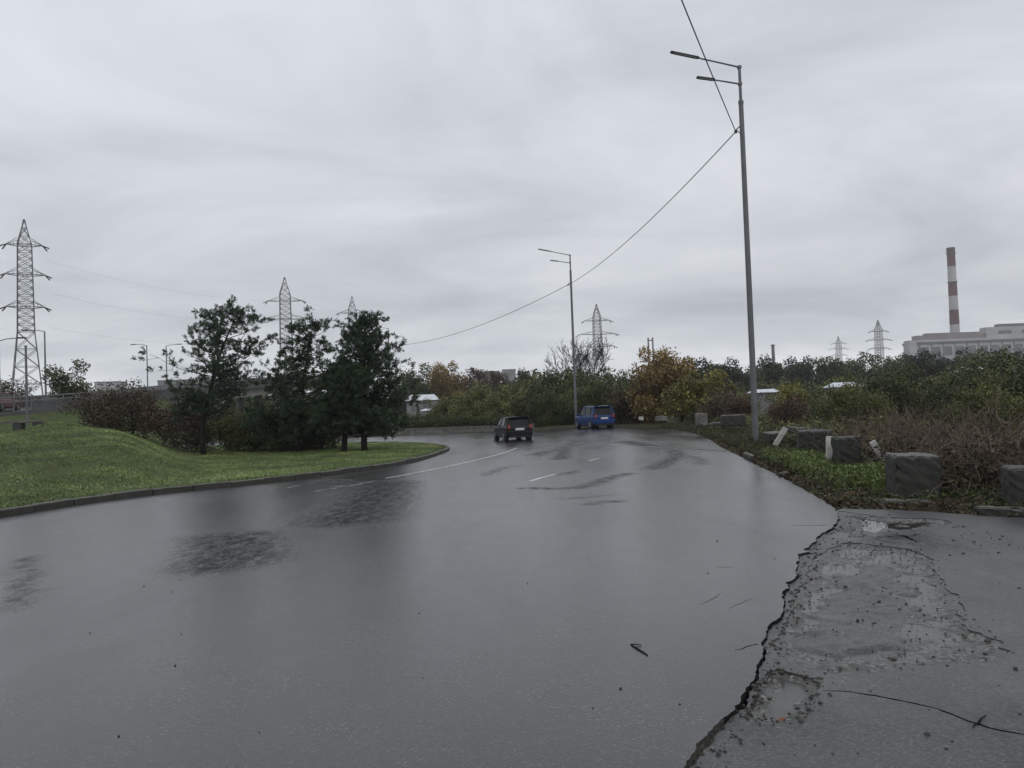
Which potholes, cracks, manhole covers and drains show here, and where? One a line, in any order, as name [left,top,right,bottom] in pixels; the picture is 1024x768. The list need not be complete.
pothole [839,511,952,540]
crack [824,690,1024,735]
pothole [775,542,1011,675]
crack [683,516,841,768]
pothole [750,668,820,723]
